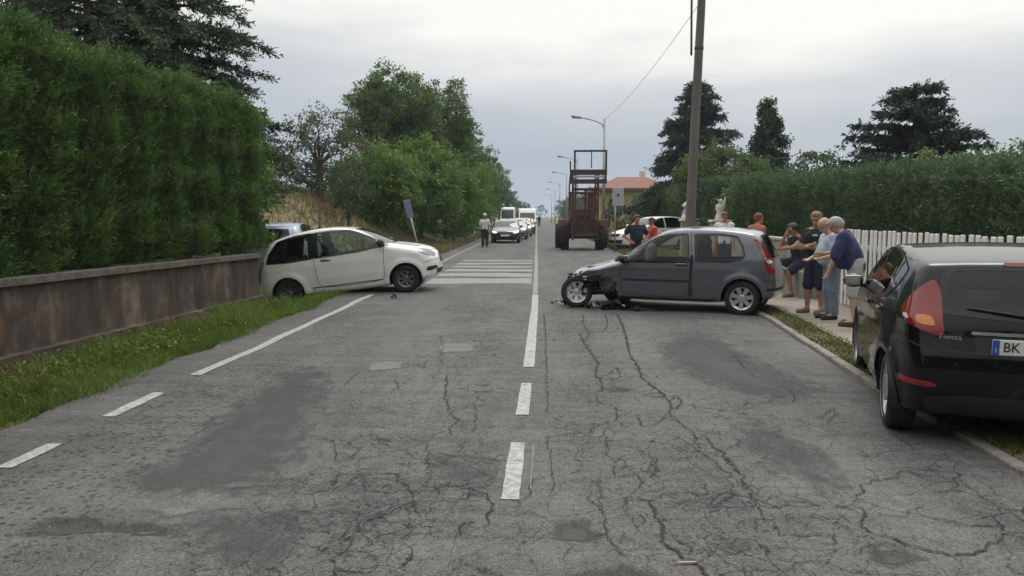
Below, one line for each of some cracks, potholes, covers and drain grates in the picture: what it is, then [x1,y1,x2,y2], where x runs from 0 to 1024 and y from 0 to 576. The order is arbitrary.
crack [271,314,1015,576]
